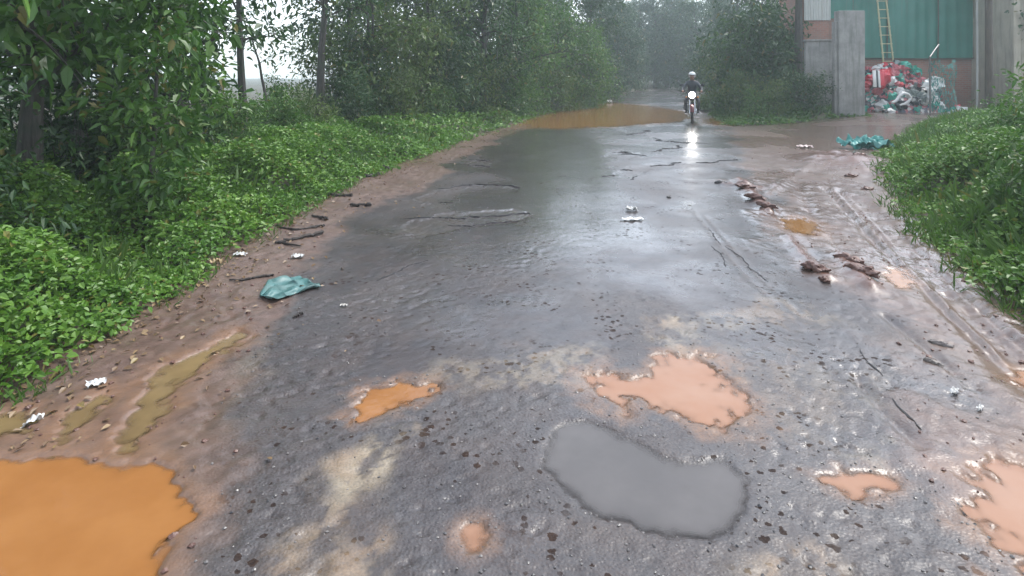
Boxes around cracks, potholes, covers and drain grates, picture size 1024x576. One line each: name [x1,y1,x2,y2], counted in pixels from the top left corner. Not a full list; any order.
pothole [577,350,769,439]
pothole [816,464,906,501]
pothole [948,454,1024,576]
pothole [448,515,497,563]
pothole [0,447,208,576]
pothole [525,413,773,553]
crack [602,130,738,180]
pothole [346,375,444,424]
